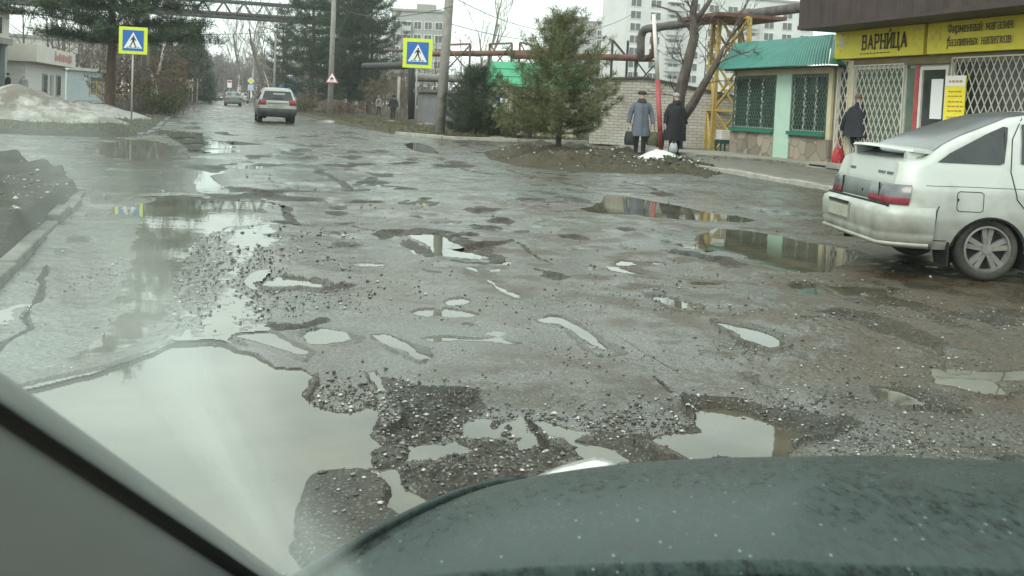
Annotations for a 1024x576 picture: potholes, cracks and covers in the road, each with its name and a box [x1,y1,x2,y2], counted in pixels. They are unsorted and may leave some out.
pothole [628,392,840,463]
pothole [710,316,793,352]
pothole [228,331,317,361]
pothole [370,333,433,361]
pothole [869,386,971,415]
pothole [823,414,863,432]
pothole [399,228,506,265]
pothole [28,340,431,576]
pothole [255,272,335,291]
pothole [532,313,628,358]
